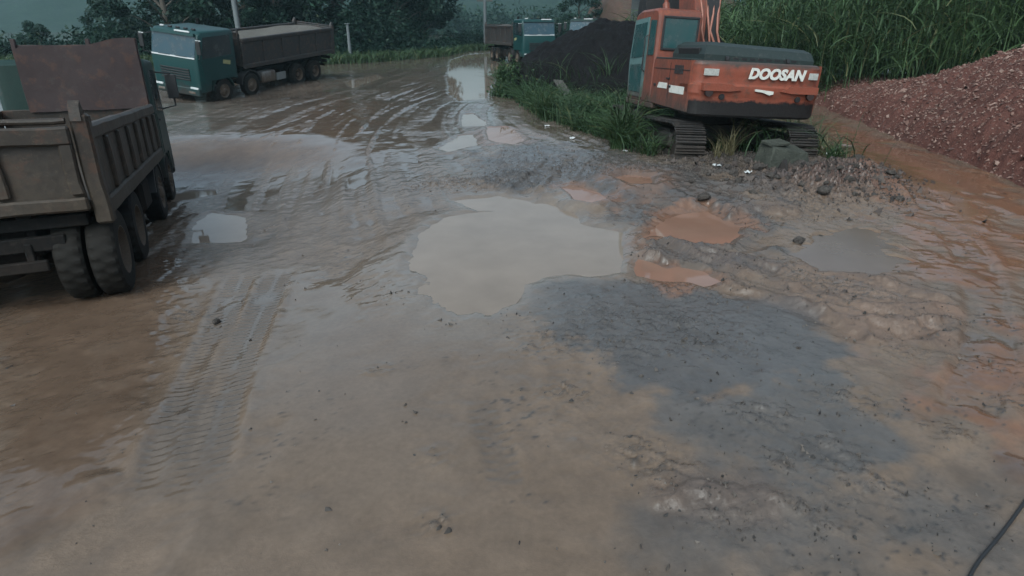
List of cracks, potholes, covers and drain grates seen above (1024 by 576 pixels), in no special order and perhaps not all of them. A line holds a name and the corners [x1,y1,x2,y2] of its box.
pothole [637,207,751,244]
pothole [628,252,729,288]
pothole [783,224,916,275]
pothole [398,194,632,318]
pothole [559,185,610,203]
pothole [183,210,253,245]
